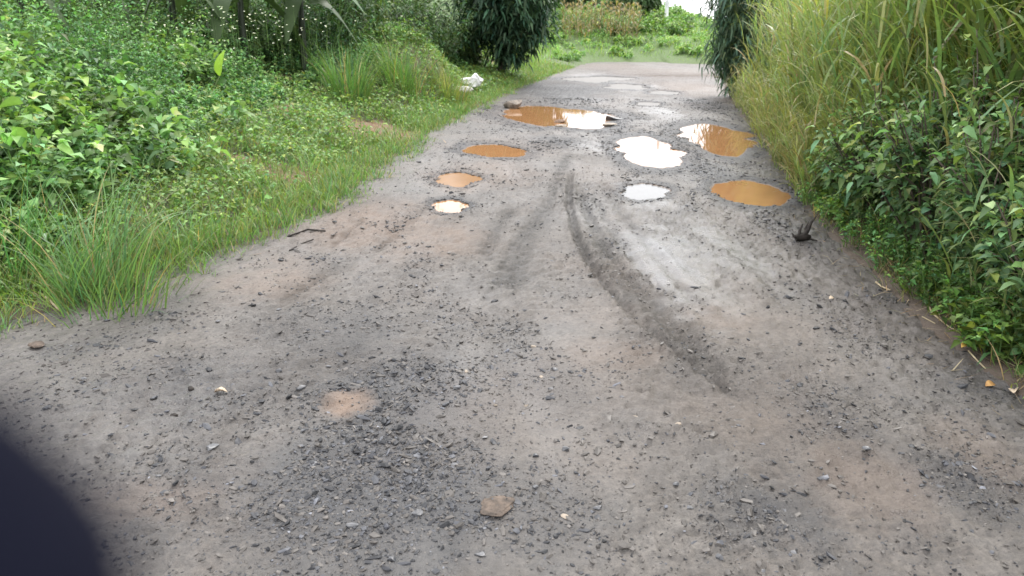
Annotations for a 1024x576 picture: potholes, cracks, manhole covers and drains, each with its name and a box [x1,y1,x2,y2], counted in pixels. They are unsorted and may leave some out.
pothole [663,119,769,165]
pothole [425,196,475,215]
pothole [695,174,802,211]
pothole [480,102,641,134]
pothole [601,131,701,175]
pothole [596,82,657,91]
pothole [612,180,680,202]
pothole [428,169,492,190]
pothole [448,141,537,160]
